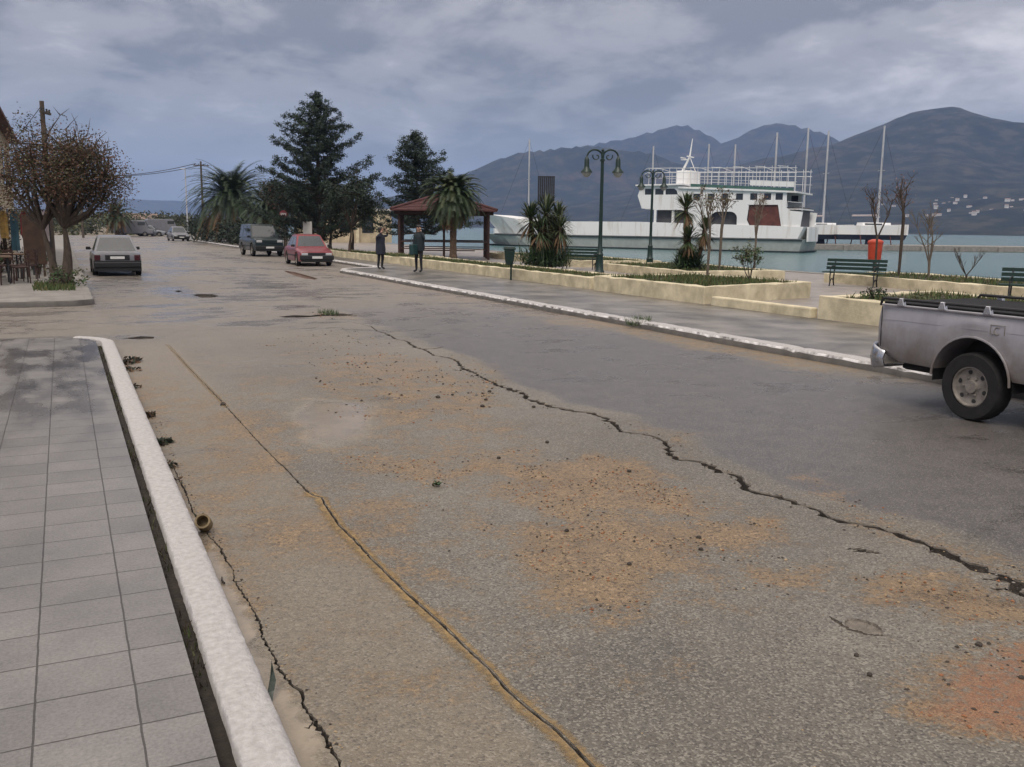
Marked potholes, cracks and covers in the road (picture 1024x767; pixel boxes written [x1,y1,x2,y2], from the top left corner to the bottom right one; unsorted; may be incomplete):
pothole [830,616,886,636]
crack [353,322,1024,597]
crack [174,468,342,767]
